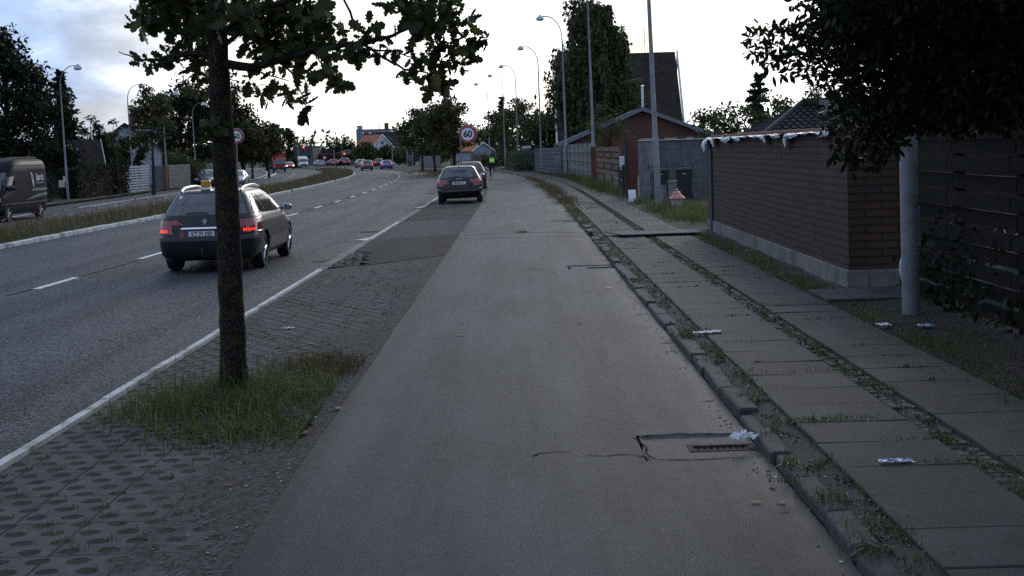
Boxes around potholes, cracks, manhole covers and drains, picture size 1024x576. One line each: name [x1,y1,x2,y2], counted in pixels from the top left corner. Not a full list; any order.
pothole [329,251,371,269]
drain grate [686,443,757,452]
